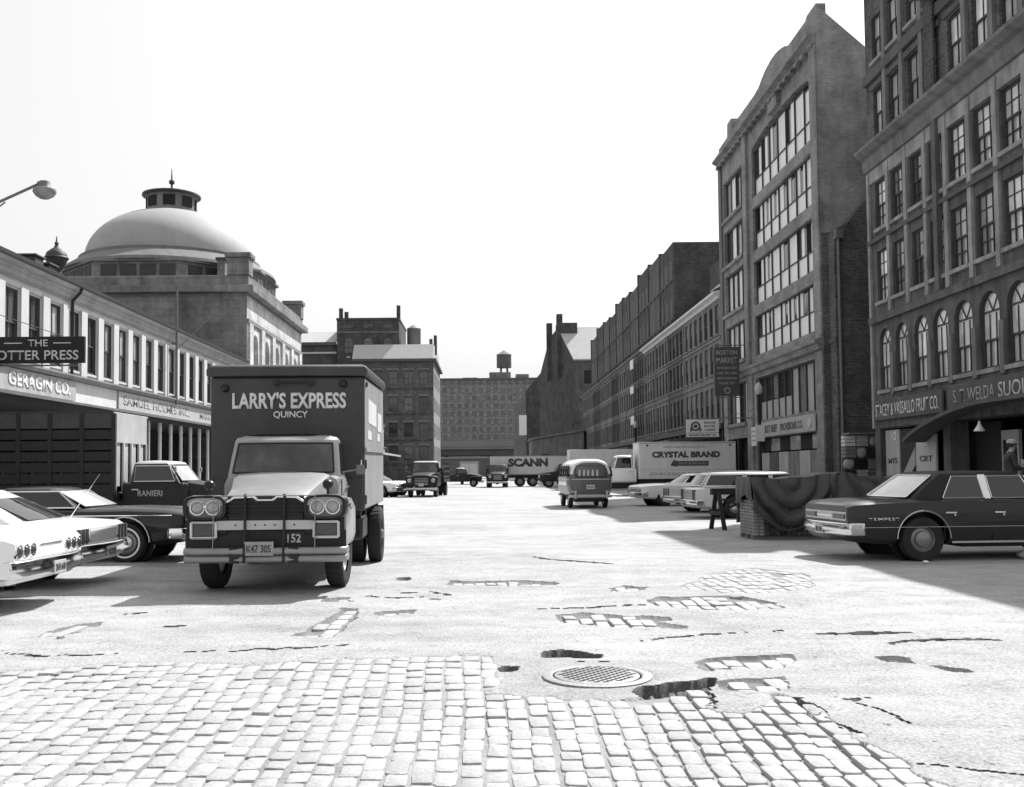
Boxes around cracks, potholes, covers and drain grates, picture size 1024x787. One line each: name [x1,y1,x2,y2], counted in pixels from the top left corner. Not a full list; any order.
crack [916,763,1024,776]
pothole [291,607,359,638]
crack [640,630,784,641]
pothole [555,612,689,629]
pothole [632,677,718,700]
pothole [693,654,798,671]
pothole [540,649,604,659]
pothole [39,622,103,639]
pothole [680,567,822,600]
manhole cover [542,664,652,688]
crack [533,556,612,564]
pothole [646,596,786,610]
